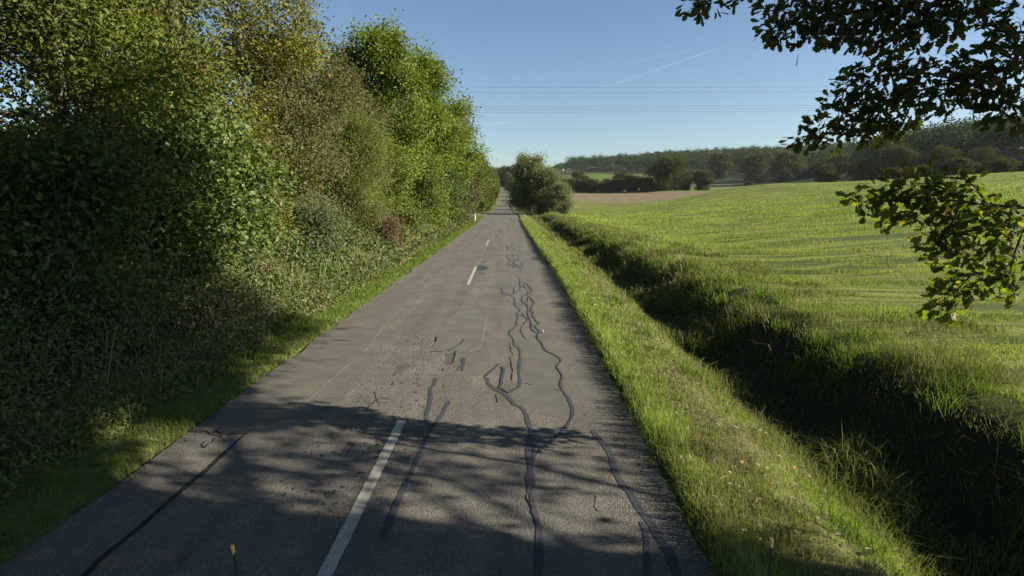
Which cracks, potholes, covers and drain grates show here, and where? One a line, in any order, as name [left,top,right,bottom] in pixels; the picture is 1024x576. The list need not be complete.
crack [194,426,244,448]
